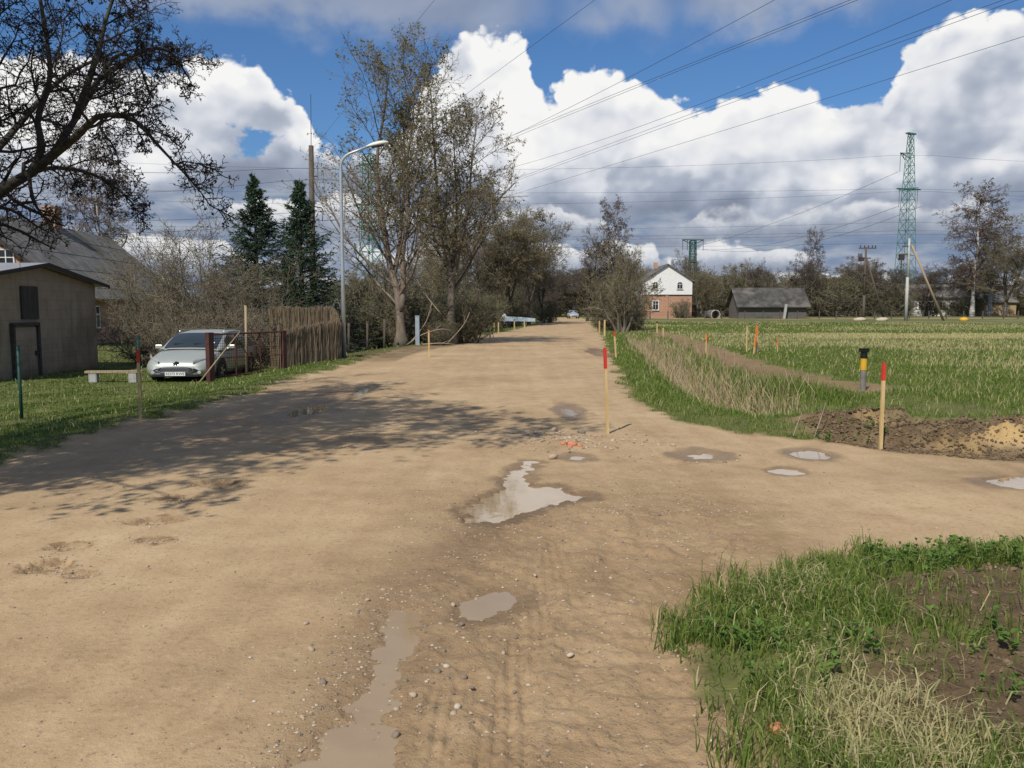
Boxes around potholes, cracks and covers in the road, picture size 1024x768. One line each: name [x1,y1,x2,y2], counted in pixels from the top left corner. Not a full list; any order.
pothole [16,558,73,575]
pothole [977,475,1024,489]
pothole [135,536,176,544]
pothole [765,467,809,476]
pothole [554,403,583,419]
pothole [665,448,733,463]
pothole [44,541,92,552]
pothole [63,570,100,579]
pothole [783,448,838,460]
pothole [447,584,532,623]
pothole [449,459,596,524]
